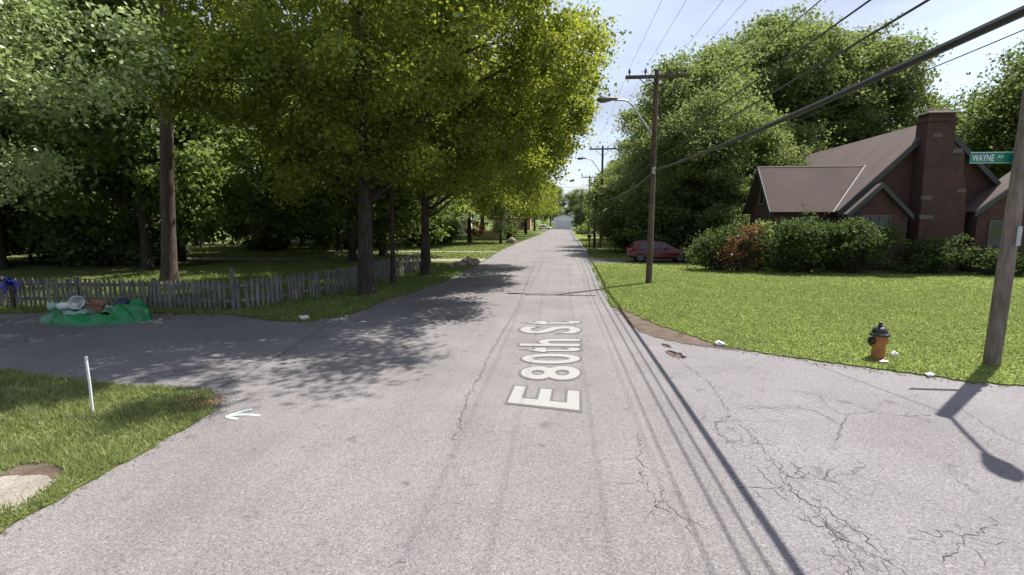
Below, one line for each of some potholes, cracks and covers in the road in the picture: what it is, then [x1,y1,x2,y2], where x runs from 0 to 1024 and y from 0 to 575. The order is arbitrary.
crack [678,359,930,575]
crack [452,262,536,440]
crack [908,516,1008,568]
crack [601,431,705,532]
pothole [665,350,686,359]
